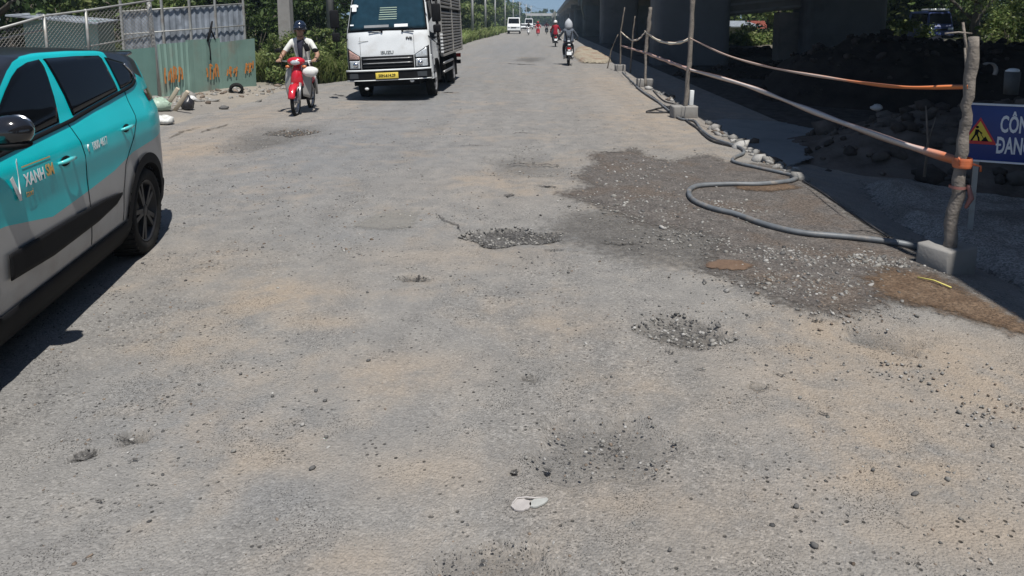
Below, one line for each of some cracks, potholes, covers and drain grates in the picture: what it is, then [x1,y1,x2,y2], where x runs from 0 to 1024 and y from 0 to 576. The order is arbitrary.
pothole [263,129,322,138]
pothole [458,225,564,249]
pothole [69,451,100,462]
pothole [525,416,689,487]
pothole [631,313,738,349]
